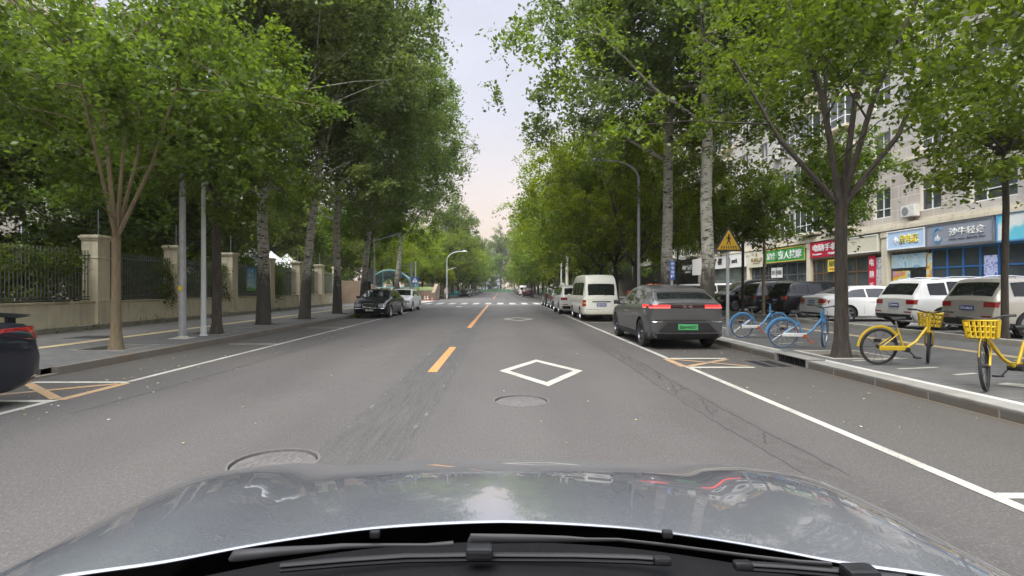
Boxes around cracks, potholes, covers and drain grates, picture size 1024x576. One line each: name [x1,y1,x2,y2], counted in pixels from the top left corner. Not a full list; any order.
manhole cover [224,448,321,471]
manhole cover [493,395,549,407]
